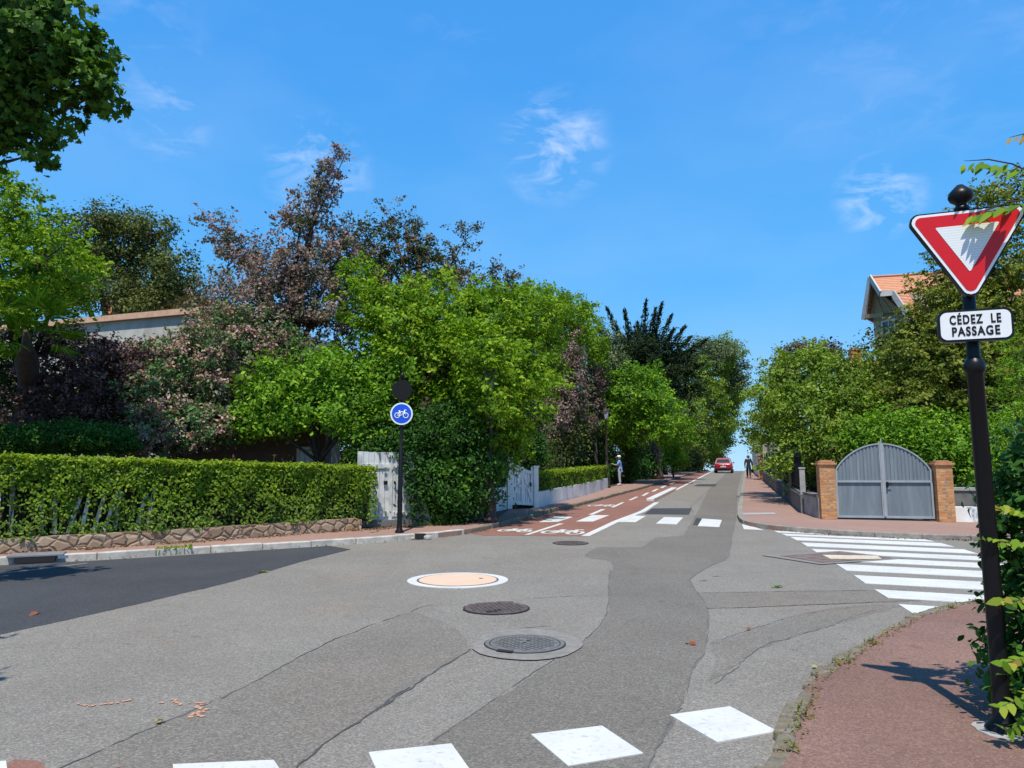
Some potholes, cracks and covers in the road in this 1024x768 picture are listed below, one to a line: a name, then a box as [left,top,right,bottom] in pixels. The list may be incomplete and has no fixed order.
manhole cover [764,551,903,564]
manhole cover [407,572,508,588]
manhole cover [472,628,583,660]
manhole cover [463,601,530,615]
